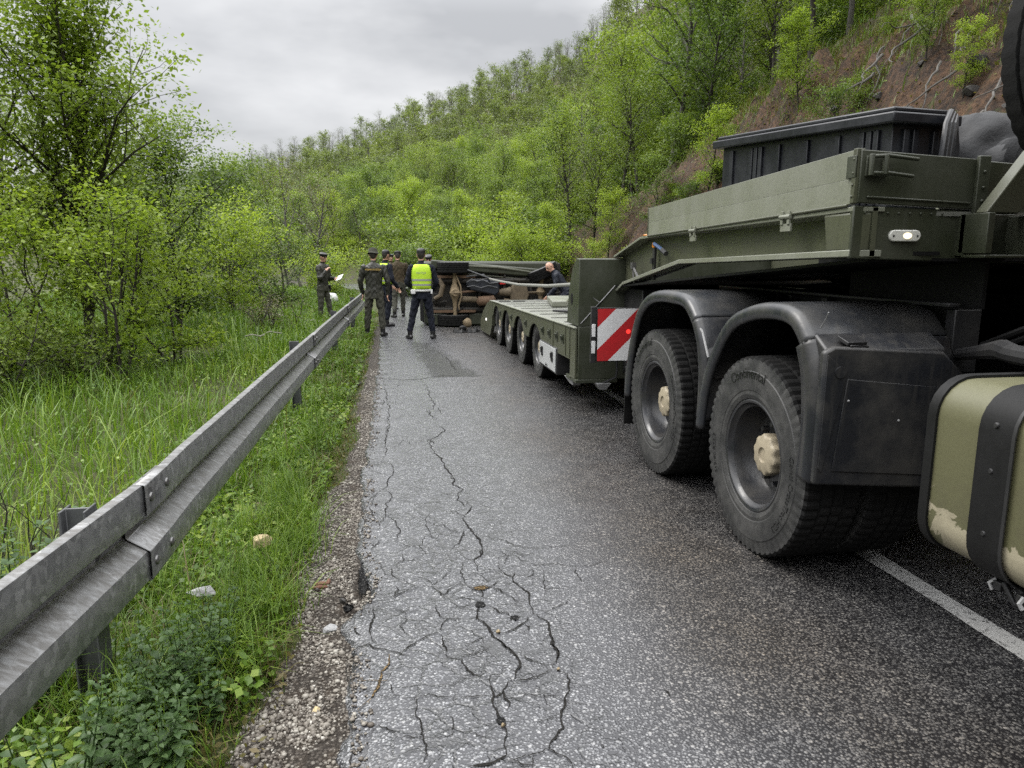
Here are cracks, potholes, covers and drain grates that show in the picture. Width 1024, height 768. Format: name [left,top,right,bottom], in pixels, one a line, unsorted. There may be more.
pothole [358,561,368,600]
crack [345,344,603,767]
